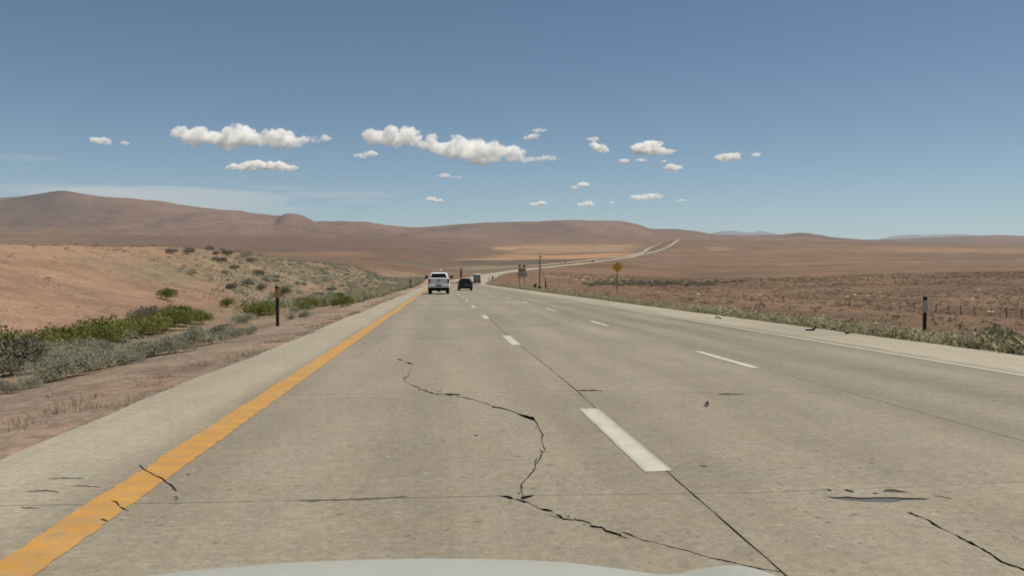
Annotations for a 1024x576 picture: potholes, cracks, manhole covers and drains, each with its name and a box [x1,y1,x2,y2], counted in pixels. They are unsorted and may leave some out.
crack [139,464,177,492]
crack [907,495,1024,571]
